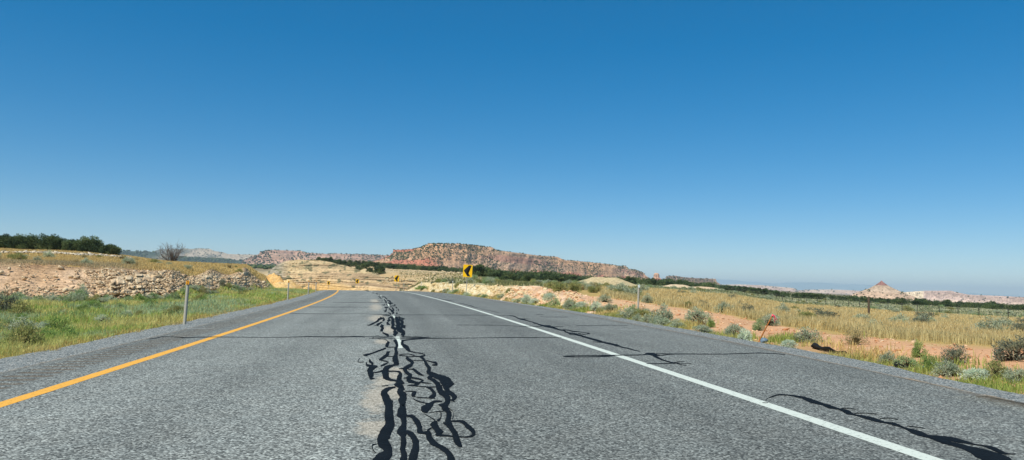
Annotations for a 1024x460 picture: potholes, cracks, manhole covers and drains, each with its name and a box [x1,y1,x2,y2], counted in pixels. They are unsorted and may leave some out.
crack [151,290,562,460]
